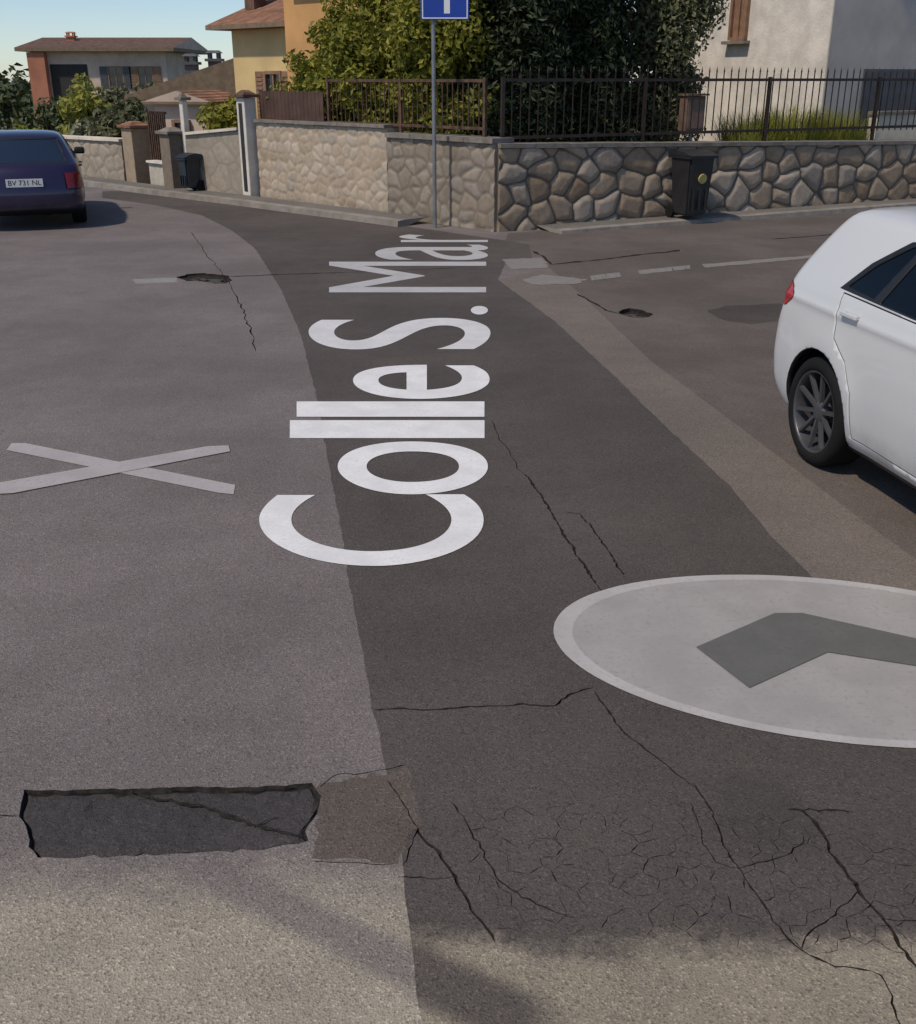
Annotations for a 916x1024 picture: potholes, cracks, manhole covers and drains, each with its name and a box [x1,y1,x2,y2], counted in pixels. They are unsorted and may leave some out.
crack [577,294,620,314]
pothole [619,308,653,318]
pothole [19,783,321,858]
pothole [177,273,232,284]
crack [492,421,624,591]
crack [375,688,916,1024]
crack [533,250,680,265]
crack [191,232,448,351]
